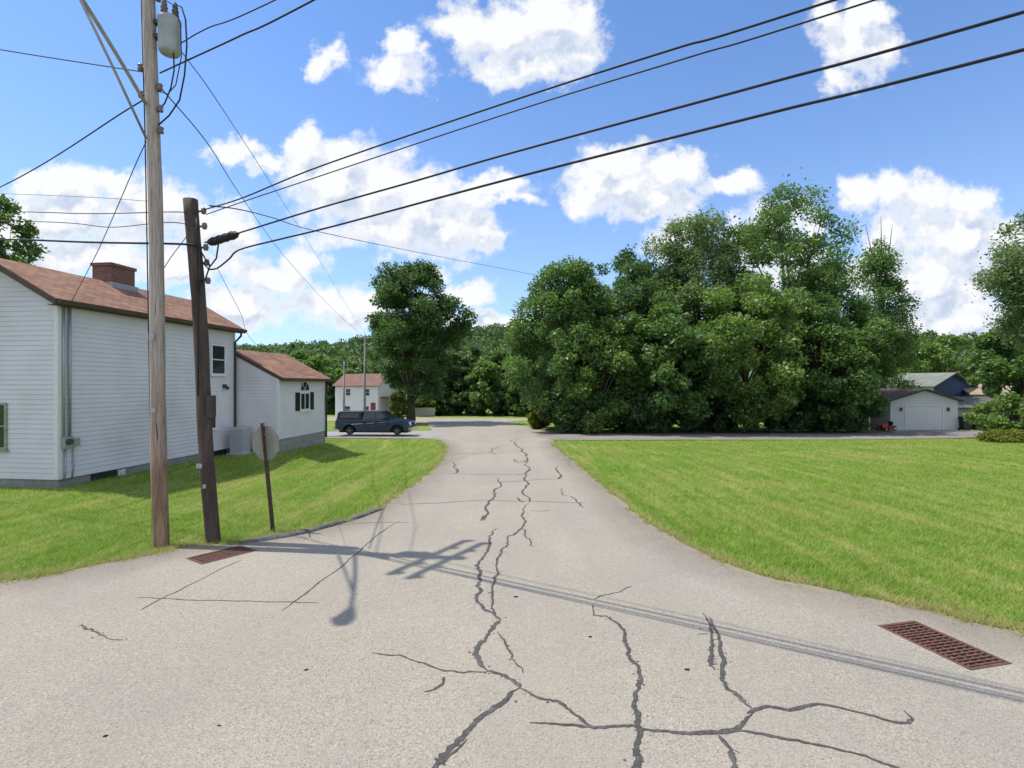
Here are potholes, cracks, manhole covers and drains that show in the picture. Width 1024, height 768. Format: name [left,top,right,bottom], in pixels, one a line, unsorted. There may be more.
crack [372,439,914,768]
drain grate [878,620,1012,670]
crack [79,624,127,640]
drain grate [186,545,257,565]
